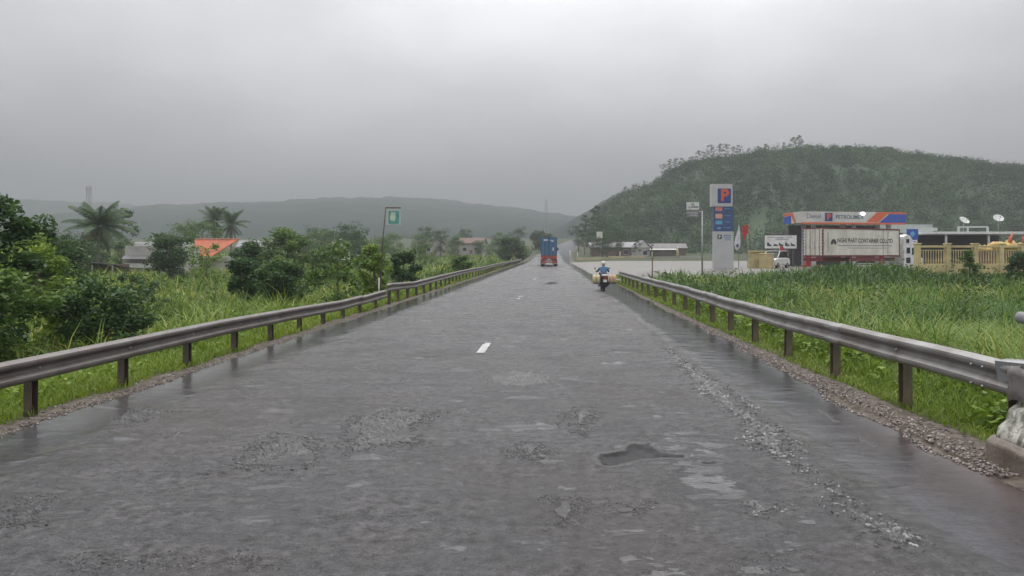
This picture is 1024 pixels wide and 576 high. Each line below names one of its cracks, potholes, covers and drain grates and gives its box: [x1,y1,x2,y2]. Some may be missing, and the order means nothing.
pothole [589,441,690,469]
crack [646,345,936,570]
